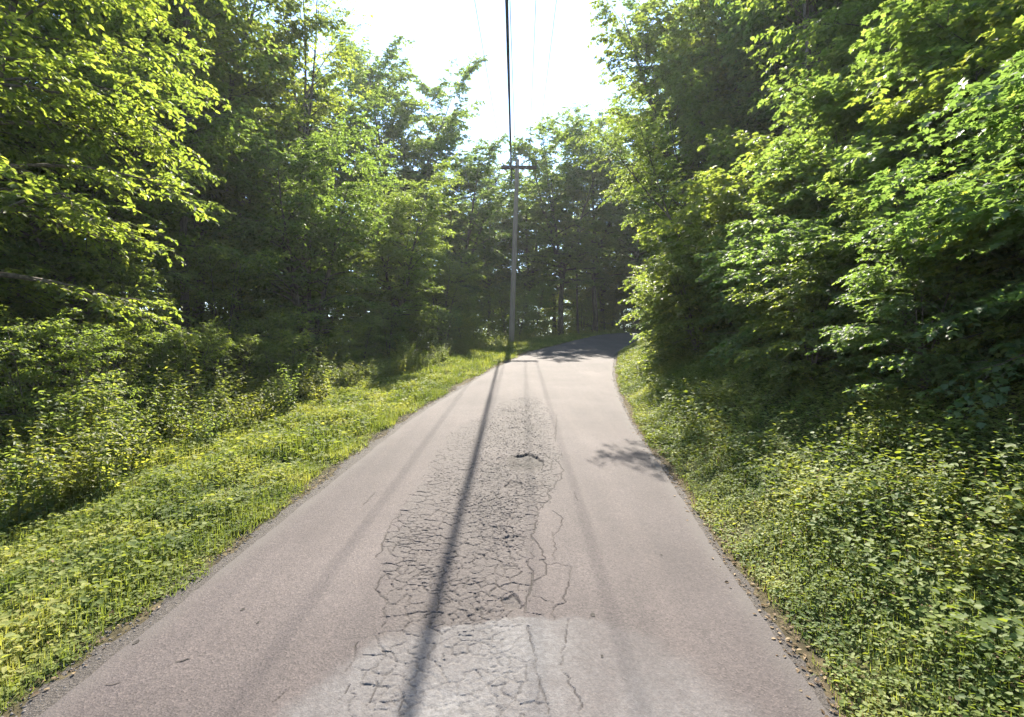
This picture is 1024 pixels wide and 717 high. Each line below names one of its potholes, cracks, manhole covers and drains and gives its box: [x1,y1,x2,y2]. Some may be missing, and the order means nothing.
crack [346,397,577,717]
crack [564,672,584,711]
pothole [506,453,545,474]
